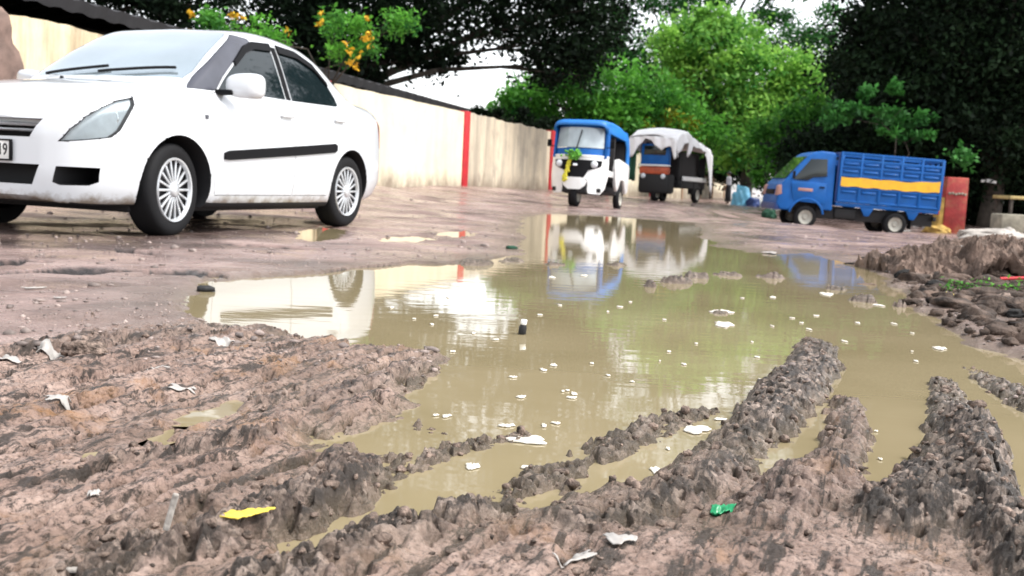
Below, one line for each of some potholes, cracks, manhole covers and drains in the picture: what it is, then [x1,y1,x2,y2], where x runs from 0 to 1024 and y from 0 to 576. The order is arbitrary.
pothole [175,213,1024,554]
